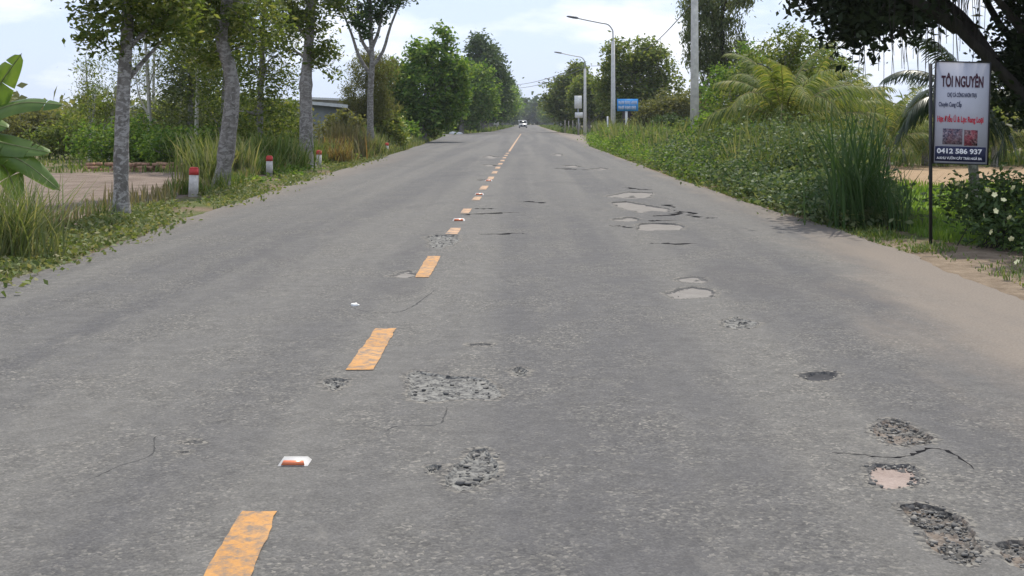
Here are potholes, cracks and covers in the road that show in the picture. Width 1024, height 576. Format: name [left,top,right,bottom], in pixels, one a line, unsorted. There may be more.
crack [86,435,161,481]
pothole [611,201,671,213]
pothole [445,447,500,491]
pothole [870,418,935,447]
crack [387,406,448,431]
pothole [721,317,759,329]
crack [832,447,974,469]
pothole [635,223,685,231]
pothole [891,501,994,565]
pothole [390,270,417,278]
pothole [665,286,715,299]
pothole [323,378,349,391]
